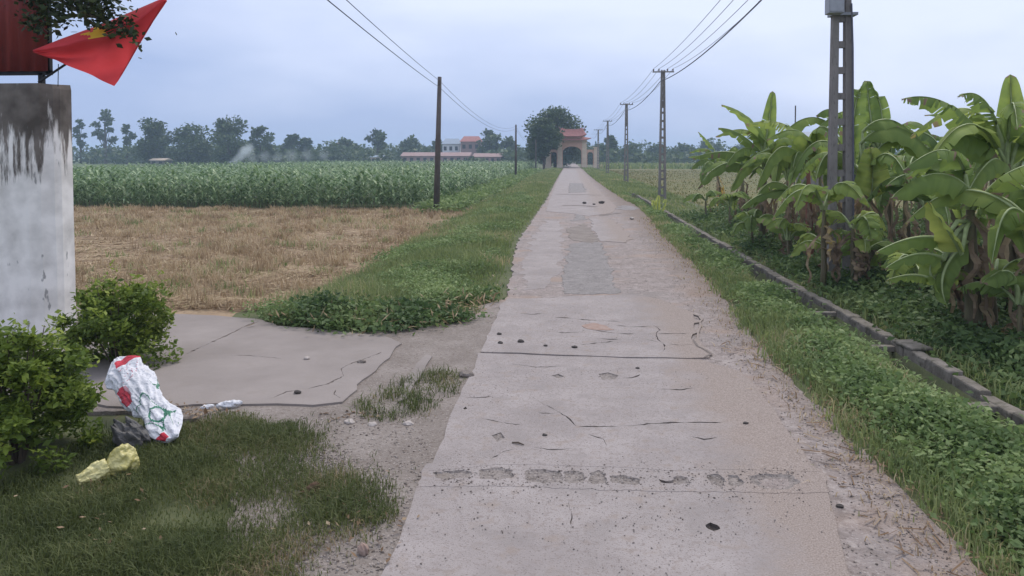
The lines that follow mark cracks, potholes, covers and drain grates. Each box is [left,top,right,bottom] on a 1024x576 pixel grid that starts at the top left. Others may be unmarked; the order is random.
pothole [653,475,690,485]
pothole [433,470,472,478]
pothole [524,469,563,484]
crack [275,352,381,398]
pothole [479,467,514,480]
pothole [563,471,586,484]
pothole [610,475,640,485]
pothole [588,470,607,484]
crack [550,407,713,444]
